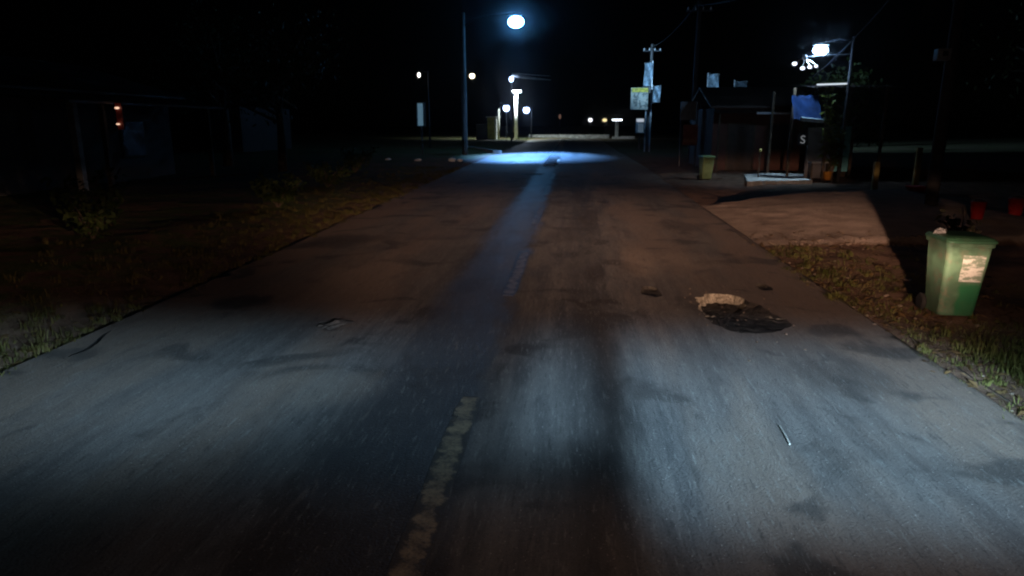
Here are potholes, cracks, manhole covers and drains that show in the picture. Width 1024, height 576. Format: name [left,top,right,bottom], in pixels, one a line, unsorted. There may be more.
pothole [641,286,662,297]
crack [68,330,112,357]
pothole [695,294,792,334]
